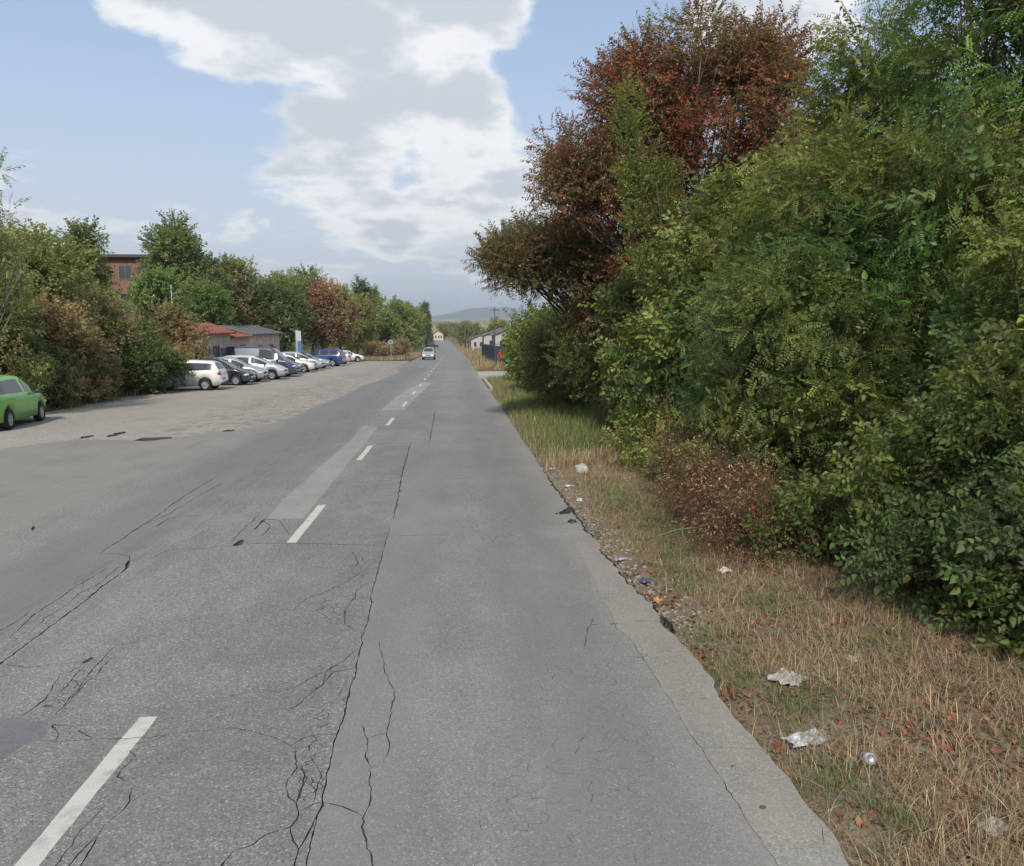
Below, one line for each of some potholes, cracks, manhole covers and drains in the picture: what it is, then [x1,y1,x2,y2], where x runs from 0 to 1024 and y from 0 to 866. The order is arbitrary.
crack [0,479,395,866]
